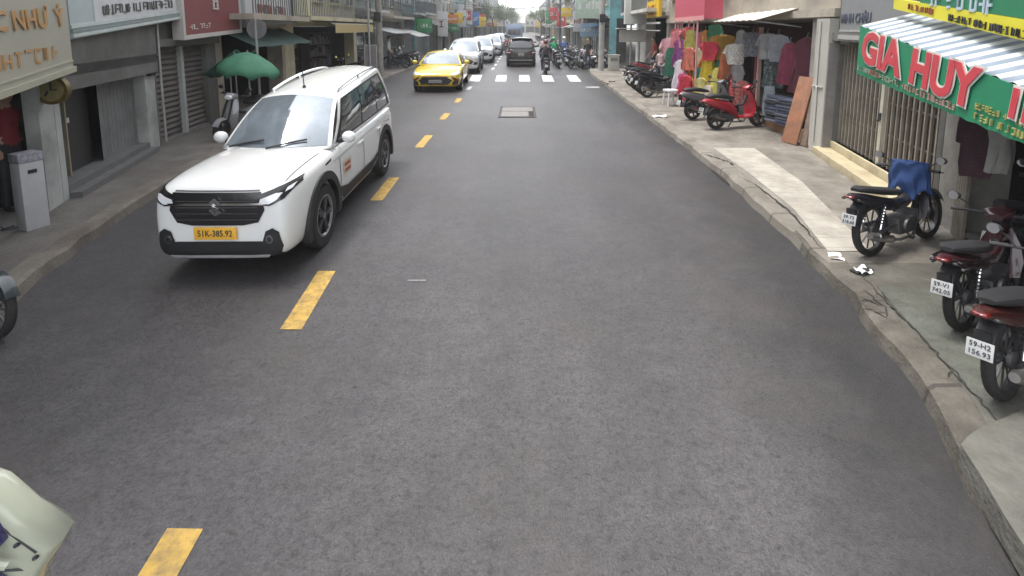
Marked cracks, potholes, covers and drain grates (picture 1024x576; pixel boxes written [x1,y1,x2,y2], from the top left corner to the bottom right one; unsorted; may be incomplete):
manhole cover [498,107,537,118]
crack [706,154,733,185]
crack [856,291,888,317]
